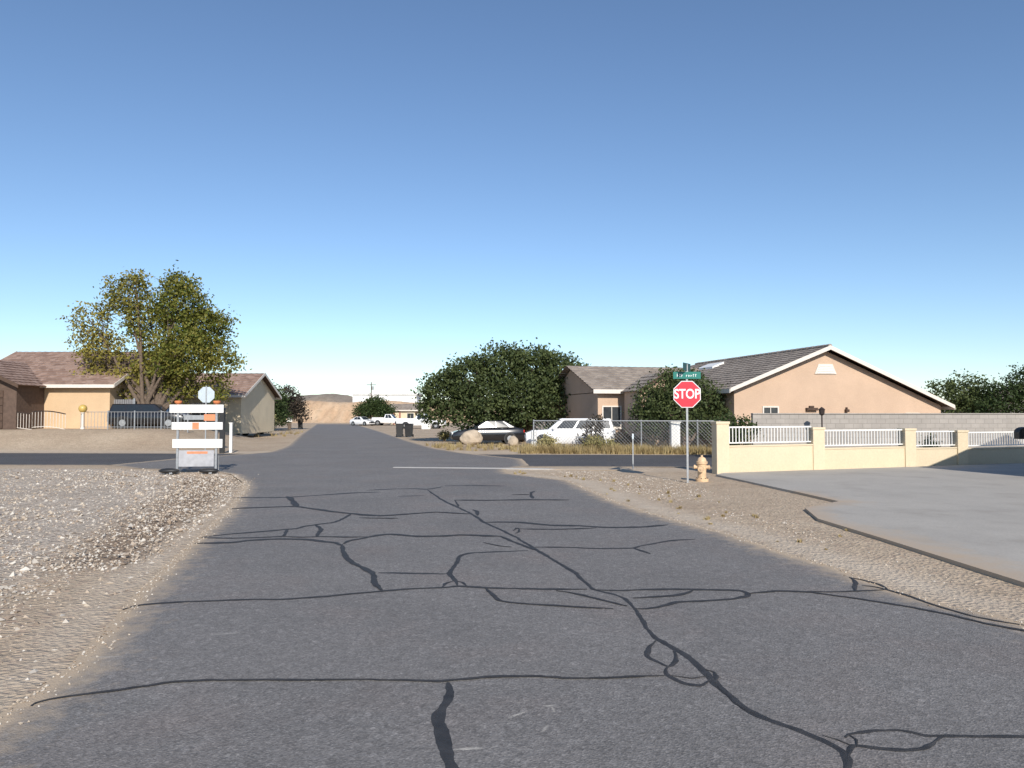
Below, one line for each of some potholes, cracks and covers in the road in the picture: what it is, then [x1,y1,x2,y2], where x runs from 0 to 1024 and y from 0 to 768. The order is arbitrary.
crack [30,675,665,706]
crack [122,485,1024,631]
